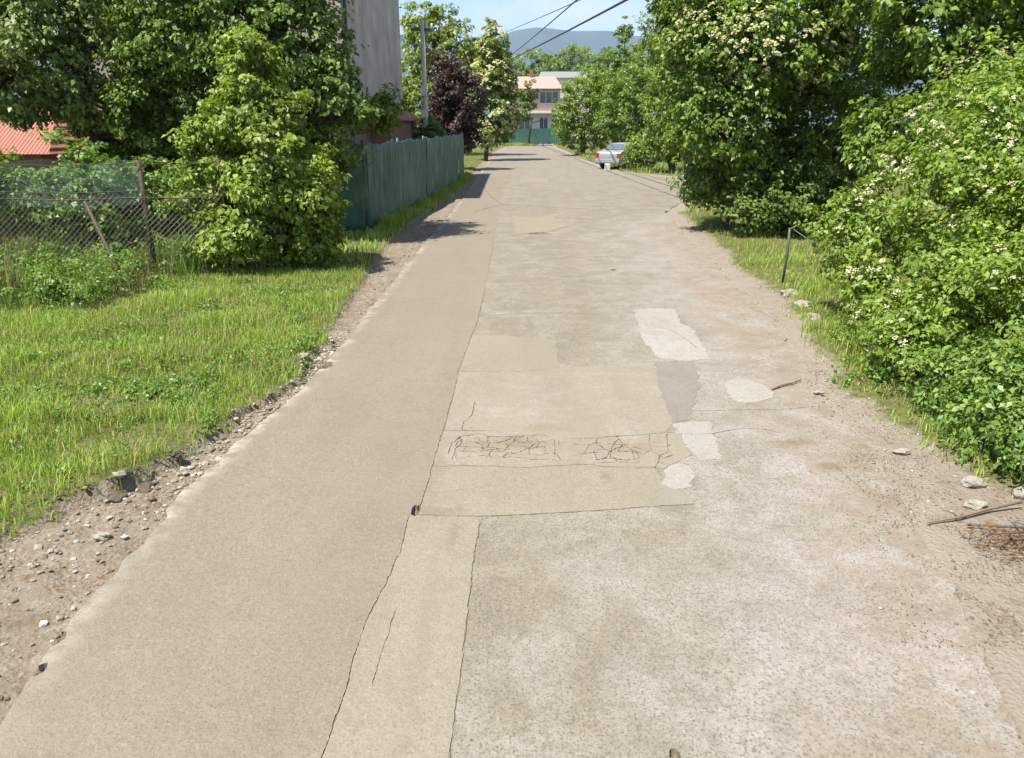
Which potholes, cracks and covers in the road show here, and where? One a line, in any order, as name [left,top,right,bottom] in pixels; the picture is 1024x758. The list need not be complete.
crack [429,402,672,468]
